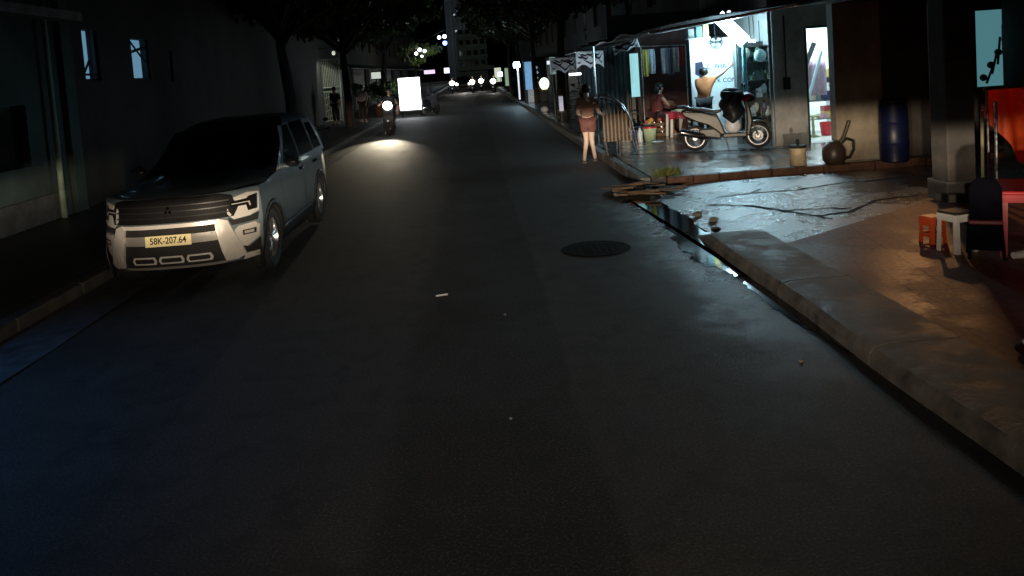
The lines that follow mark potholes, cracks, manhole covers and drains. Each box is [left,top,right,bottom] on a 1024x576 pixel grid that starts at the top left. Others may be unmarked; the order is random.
crack [707,177,919,219]
manhole cover [561,240,631,257]
